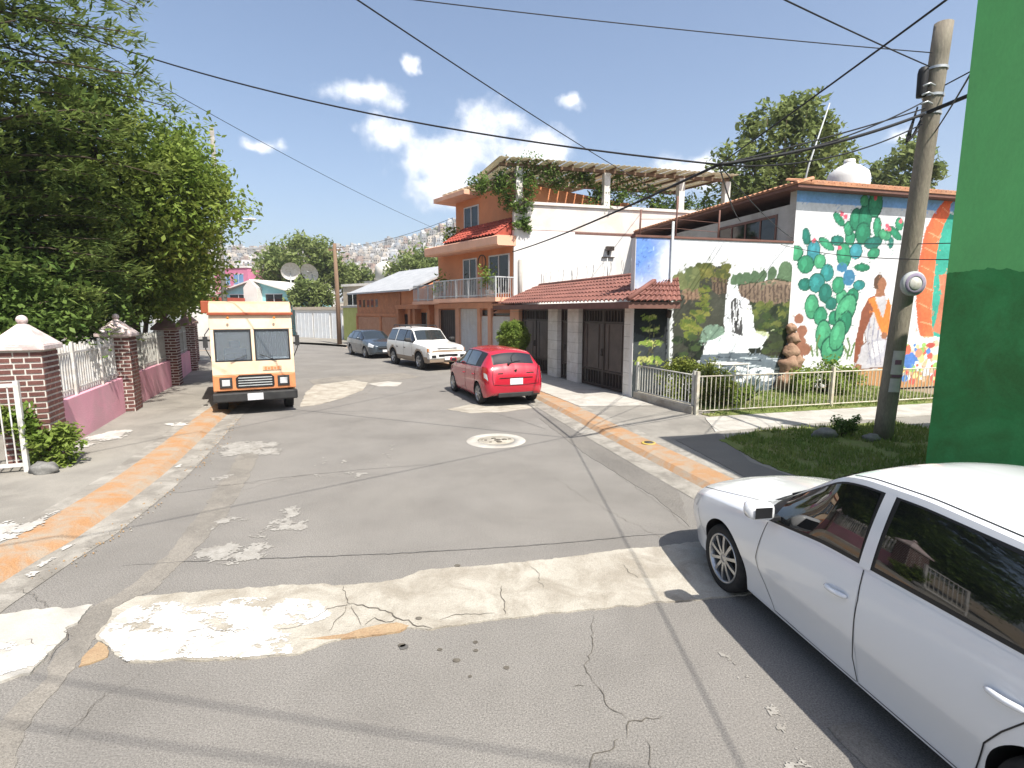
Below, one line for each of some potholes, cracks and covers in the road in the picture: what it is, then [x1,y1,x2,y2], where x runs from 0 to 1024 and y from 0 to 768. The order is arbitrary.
crack [575,614,664,768]
manhole cover [466,433,526,448]
crack [306,587,484,629]
